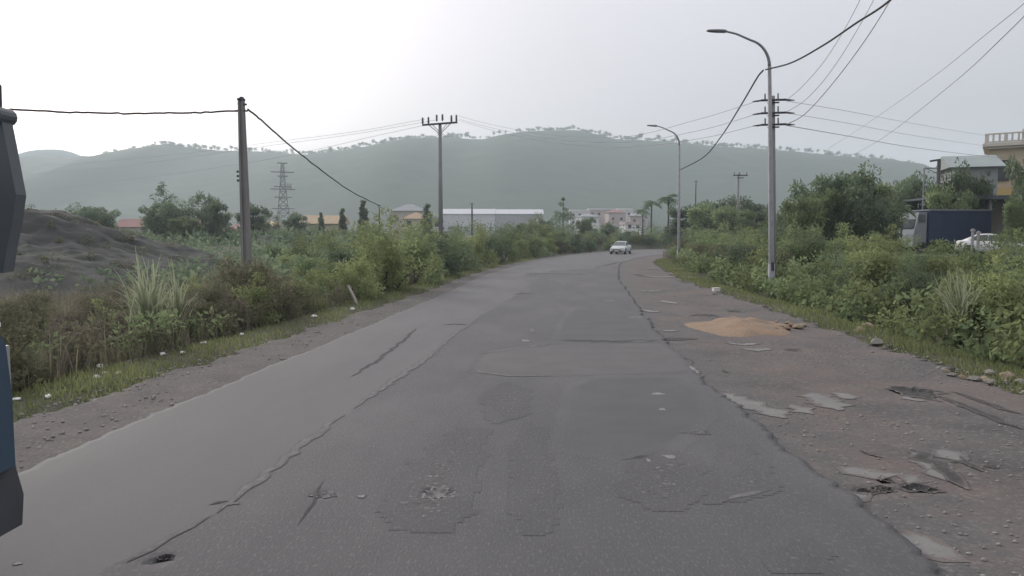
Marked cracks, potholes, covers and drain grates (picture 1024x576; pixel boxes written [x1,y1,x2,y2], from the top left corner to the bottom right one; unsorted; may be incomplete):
pothole [897,482,946,493]
crack [721,489,771,502]
pothole [855,487,878,496]
pothole [419,486,459,500]
pothole [872,485,897,493]
crack [298,481,323,523]
pothole [156,554,174,563]
pothole [885,385,949,402]
crack [350,328,416,377]
